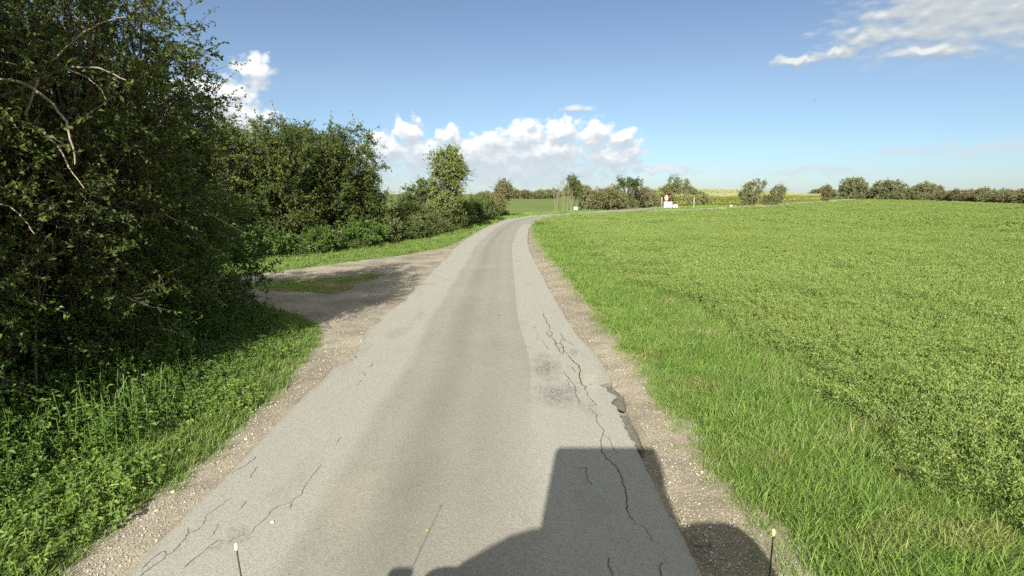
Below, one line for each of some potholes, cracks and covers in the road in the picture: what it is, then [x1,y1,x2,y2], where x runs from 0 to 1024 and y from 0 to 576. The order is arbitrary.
crack [537,313,653,542]
pothole [602,384,626,413]
crack [141,470,317,575]
